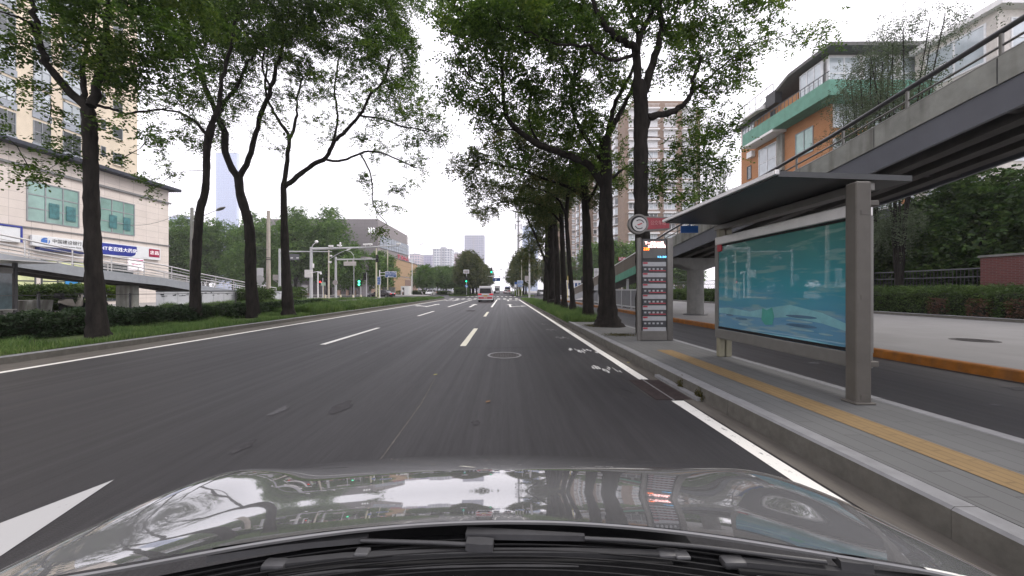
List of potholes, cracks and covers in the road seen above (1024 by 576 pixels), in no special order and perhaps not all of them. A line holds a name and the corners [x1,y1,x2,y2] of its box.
drain grate [629,374,703,401]
